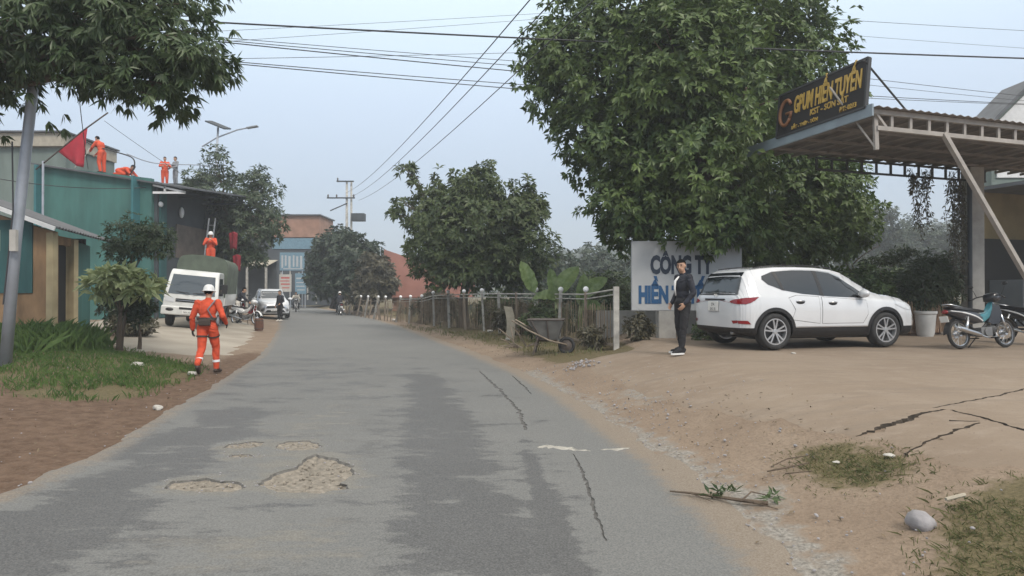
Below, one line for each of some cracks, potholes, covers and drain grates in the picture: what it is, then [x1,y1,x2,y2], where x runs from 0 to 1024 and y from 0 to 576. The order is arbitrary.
pothole [224,441,264,449]
pothole [257,454,355,494]
crack [479,371,629,541]
pothole [276,441,322,451]
pothole [164,478,245,492]
crack [905,410,1024,456]
